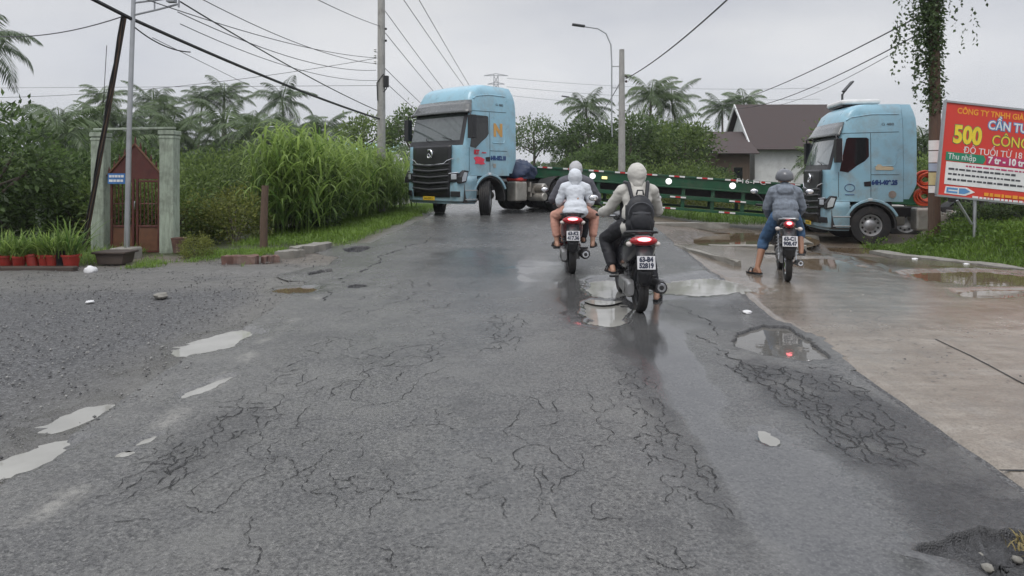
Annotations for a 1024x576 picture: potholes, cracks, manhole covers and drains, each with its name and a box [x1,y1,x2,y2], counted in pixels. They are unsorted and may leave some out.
crack [476,367,733,529]
pothole [708,320,857,370]
crack [479,315,527,352]
crack [323,237,479,315]
crack [243,516,263,572]
crack [98,330,453,522]
crack [678,306,926,467]
crack [465,476,507,517]
crack [644,545,697,570]
pothole [328,281,390,293]
